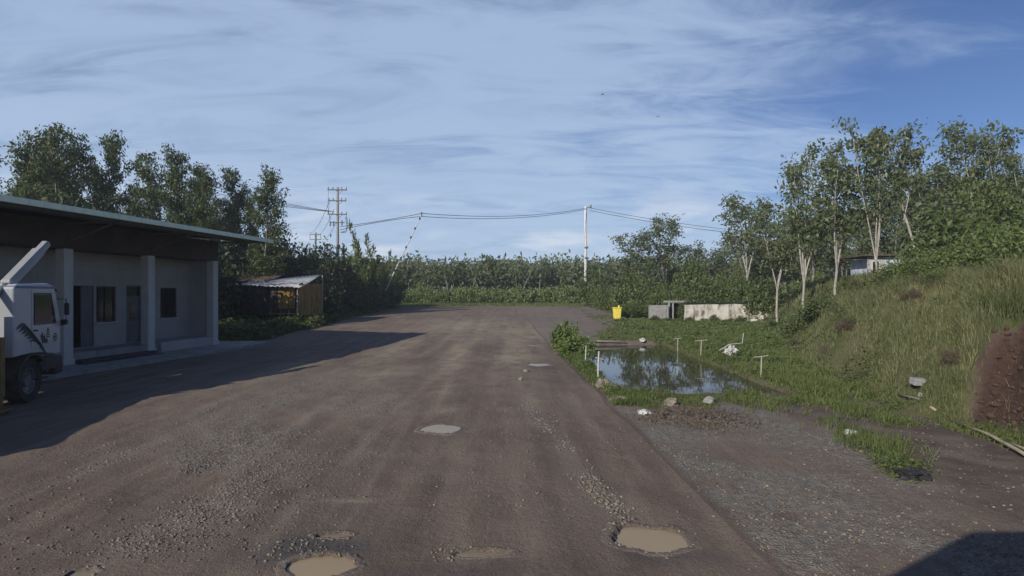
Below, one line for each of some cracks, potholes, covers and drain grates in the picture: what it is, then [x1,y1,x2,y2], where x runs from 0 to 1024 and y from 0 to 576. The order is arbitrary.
pothole [444,546,521,560]
pothole [413,422,467,436]
pothole [308,530,359,540]
pothole [275,550,368,576]
pothole [57,566,106,576]
pothole [599,520,703,557]
